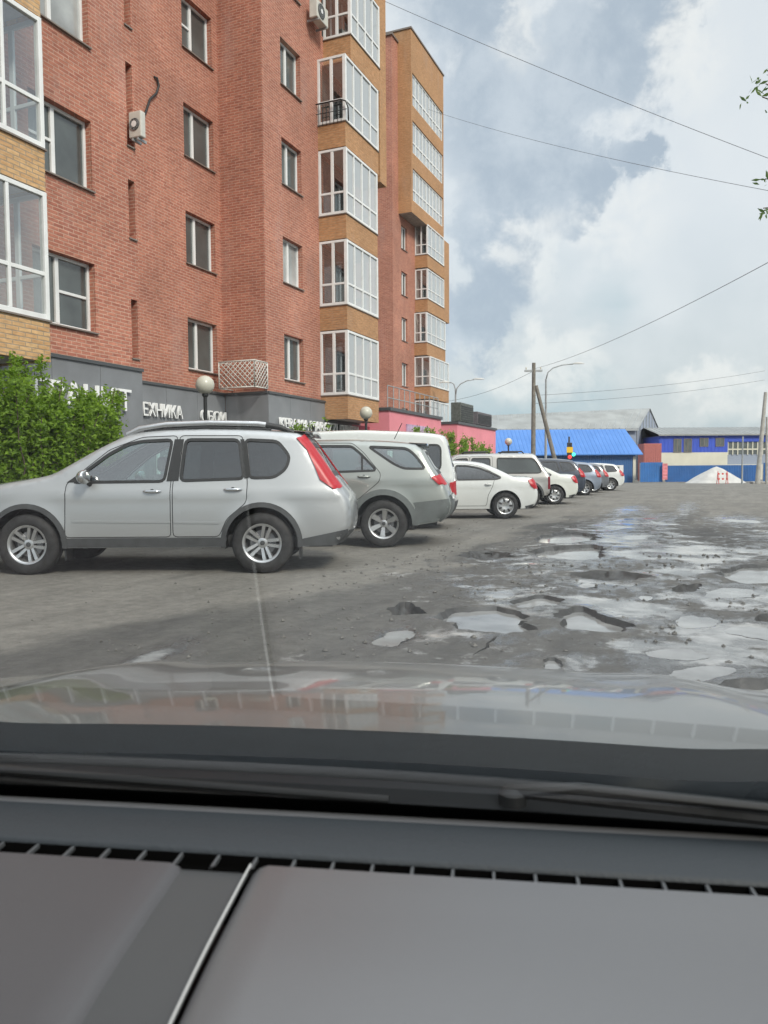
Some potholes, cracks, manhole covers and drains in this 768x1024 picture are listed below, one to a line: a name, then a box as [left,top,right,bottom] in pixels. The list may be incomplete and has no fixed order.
pothole [672,583,702,592]
pothole [535,532,602,542]
pothole [386,602,426,615]
pothole [553,606,637,632]
pothole [509,594,565,607]
crack [473,635,499,655]
pothole [718,677,768,690]
pothole [715,564,768,576]
pothole [432,606,538,631]
pothole [527,544,607,559]
